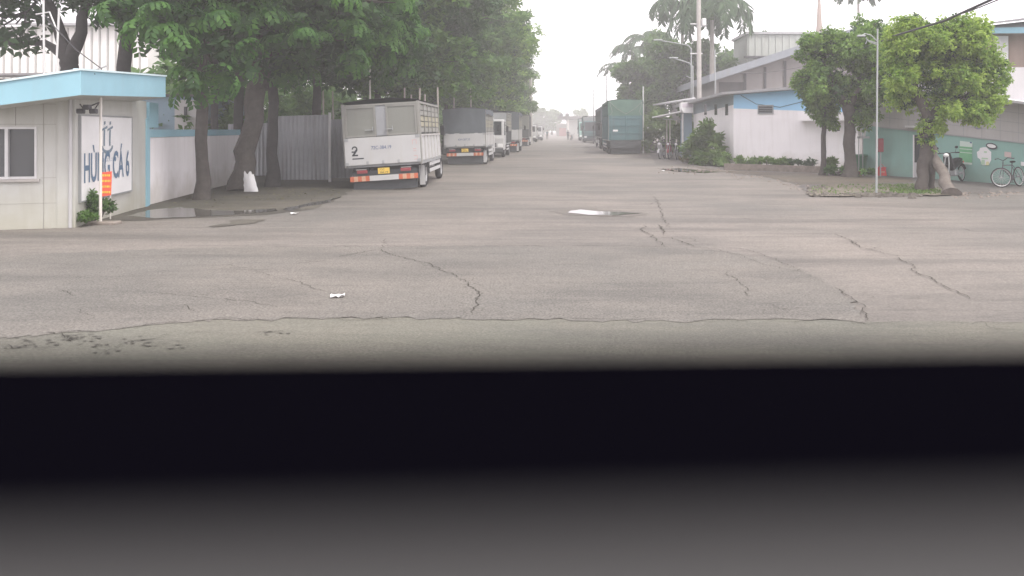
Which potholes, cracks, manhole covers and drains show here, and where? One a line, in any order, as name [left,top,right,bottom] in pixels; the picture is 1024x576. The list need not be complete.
crack [641,199,798,271]
crack [745,218,970,298]
crack [1,289,661,353]
crack [242,245,483,314]
crack [694,275,904,324]
